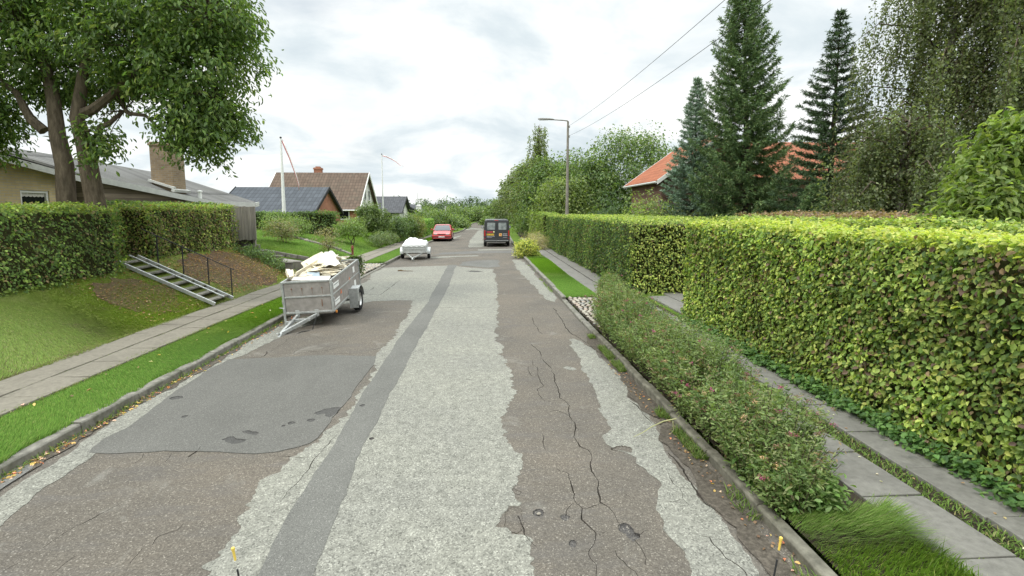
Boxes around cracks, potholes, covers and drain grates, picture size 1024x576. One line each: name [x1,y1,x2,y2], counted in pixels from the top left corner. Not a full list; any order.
crack [269,433,339,498]
pothole [618,523,640,542]
crack [528,317,635,573]
